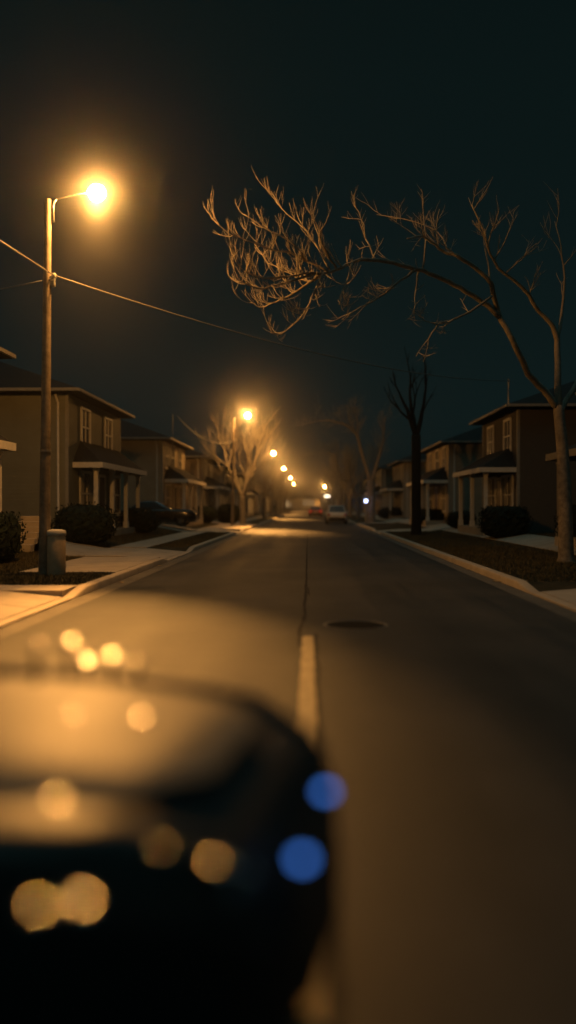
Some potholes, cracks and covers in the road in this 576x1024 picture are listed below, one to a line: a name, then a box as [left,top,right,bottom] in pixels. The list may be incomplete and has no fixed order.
manhole cover [323,620,388,630]
crack [297,535,344,1024]
